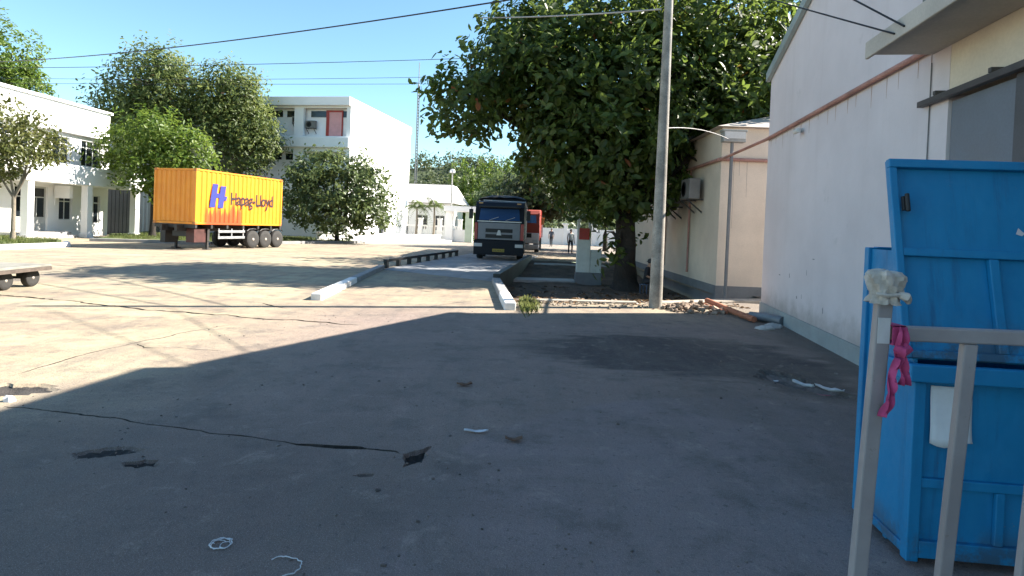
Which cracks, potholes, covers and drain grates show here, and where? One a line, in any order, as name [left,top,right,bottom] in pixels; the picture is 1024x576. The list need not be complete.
pothole [402,446,433,467]
pothole [71,446,145,459]
pothole [0,383,61,396]
crack [4,406,400,454]
pothole [121,459,159,468]
